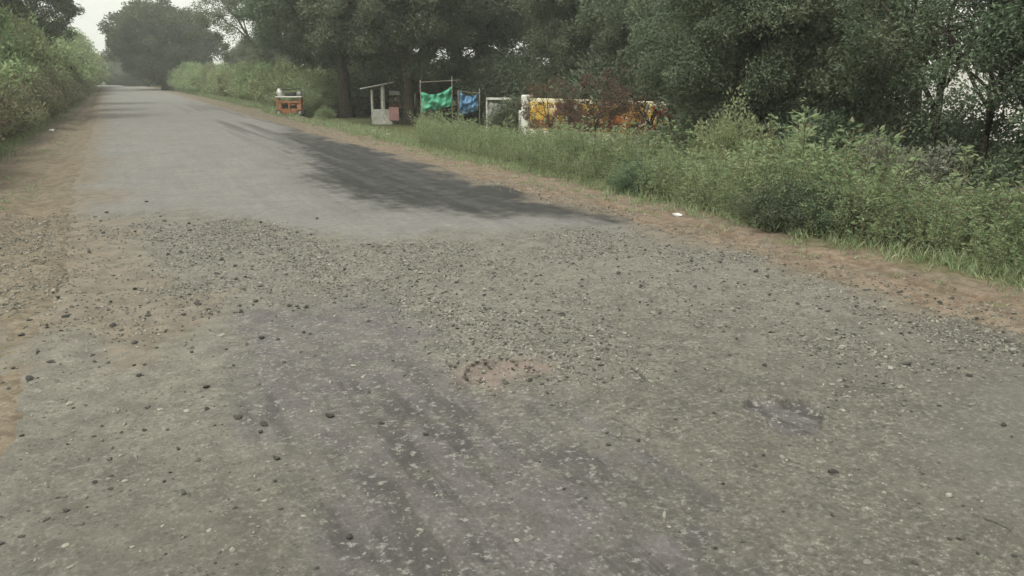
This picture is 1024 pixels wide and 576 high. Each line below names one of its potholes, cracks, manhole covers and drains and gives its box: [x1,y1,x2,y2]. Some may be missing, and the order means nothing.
pothole [456,357,562,389]
pothole [735,396,831,441]
crack [964,510,1013,534]
